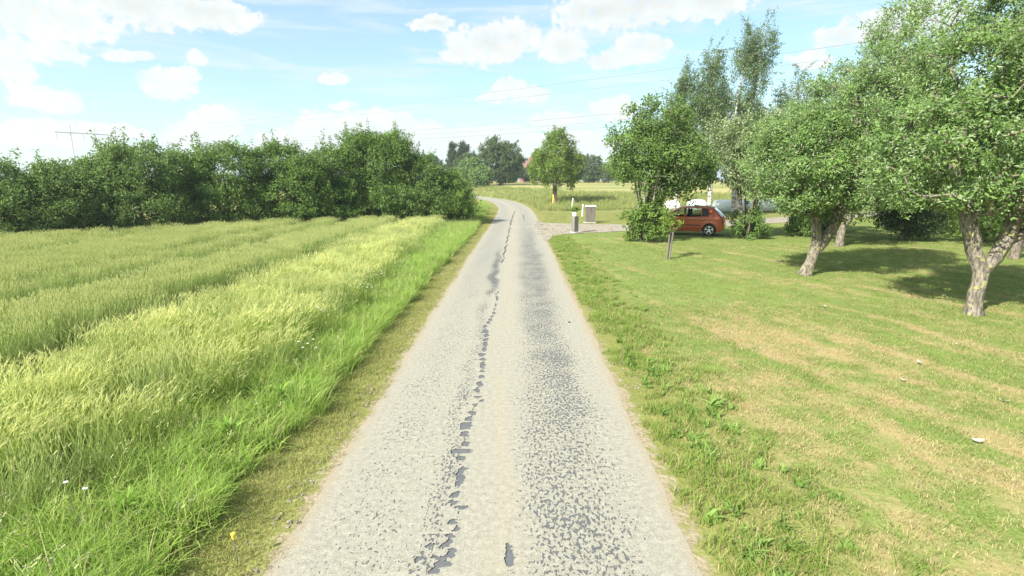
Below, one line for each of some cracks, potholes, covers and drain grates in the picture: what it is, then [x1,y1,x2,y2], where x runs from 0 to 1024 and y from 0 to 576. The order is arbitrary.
crack [414,291,499,574]
pothole [504,543,516,571]
